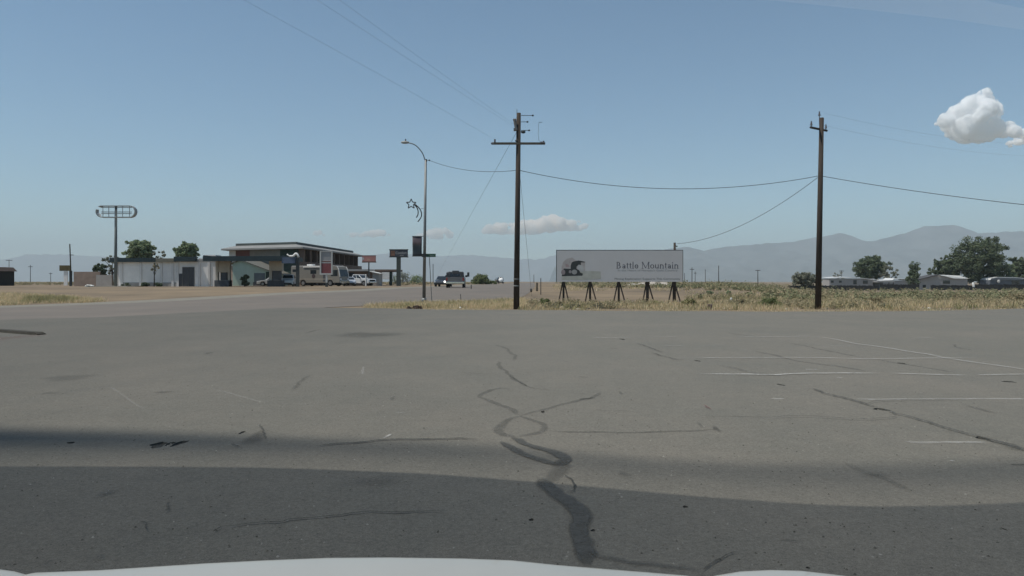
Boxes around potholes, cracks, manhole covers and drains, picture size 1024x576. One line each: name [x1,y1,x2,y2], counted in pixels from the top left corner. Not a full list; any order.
crack [324,437,469,445]
crack [237,510,433,525]
